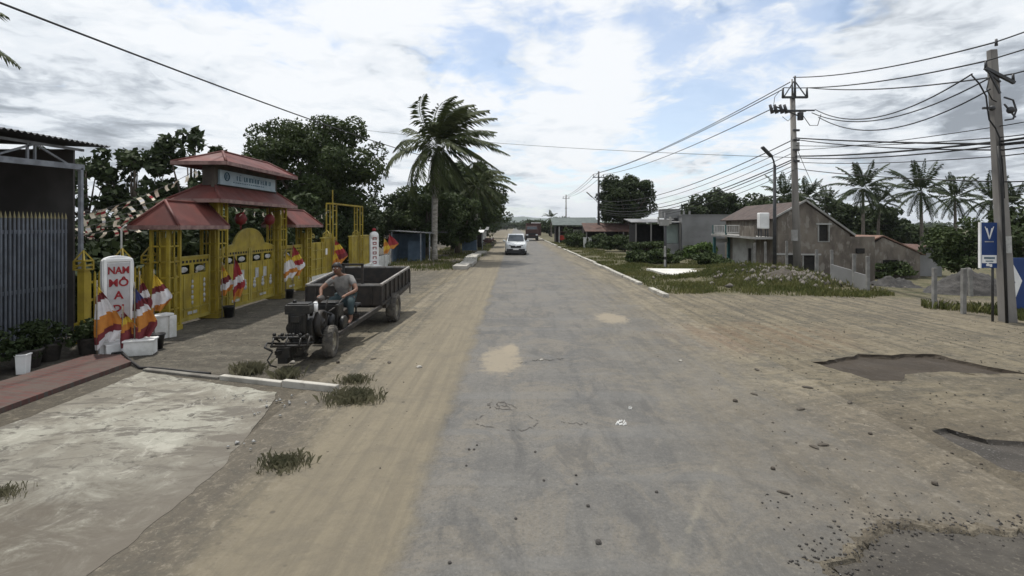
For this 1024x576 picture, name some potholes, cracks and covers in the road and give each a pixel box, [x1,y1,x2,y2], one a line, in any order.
pothole [806,353,1024,383]
crack [476,401,538,431]
pothole [922,425,1024,477]
pothole [800,517,1024,576]
